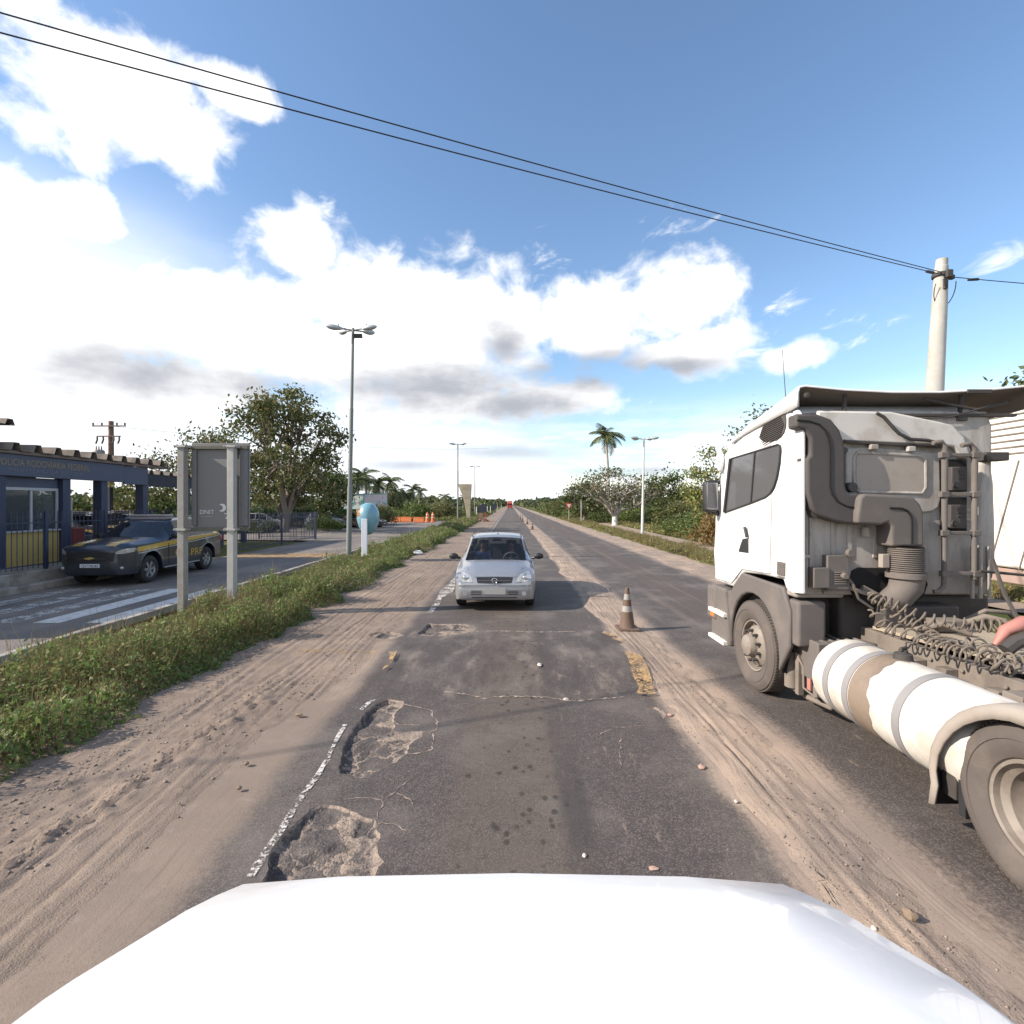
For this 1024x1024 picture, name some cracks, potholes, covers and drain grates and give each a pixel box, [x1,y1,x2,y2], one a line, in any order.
crack [344,778,413,831]
crack [393,691,622,754]
pothole [261,805,384,883]
pothole [418,623,475,637]
pothole [338,699,423,778]
